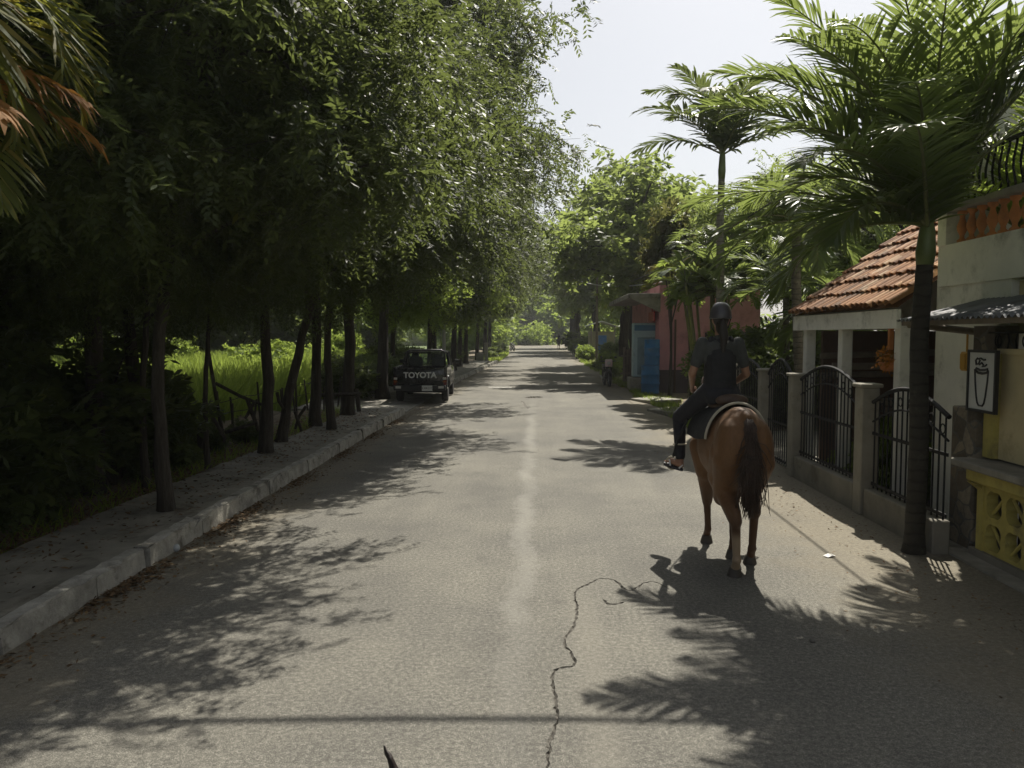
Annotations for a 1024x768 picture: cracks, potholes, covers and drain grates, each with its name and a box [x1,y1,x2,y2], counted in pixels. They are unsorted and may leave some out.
crack [546,578,669,768]
